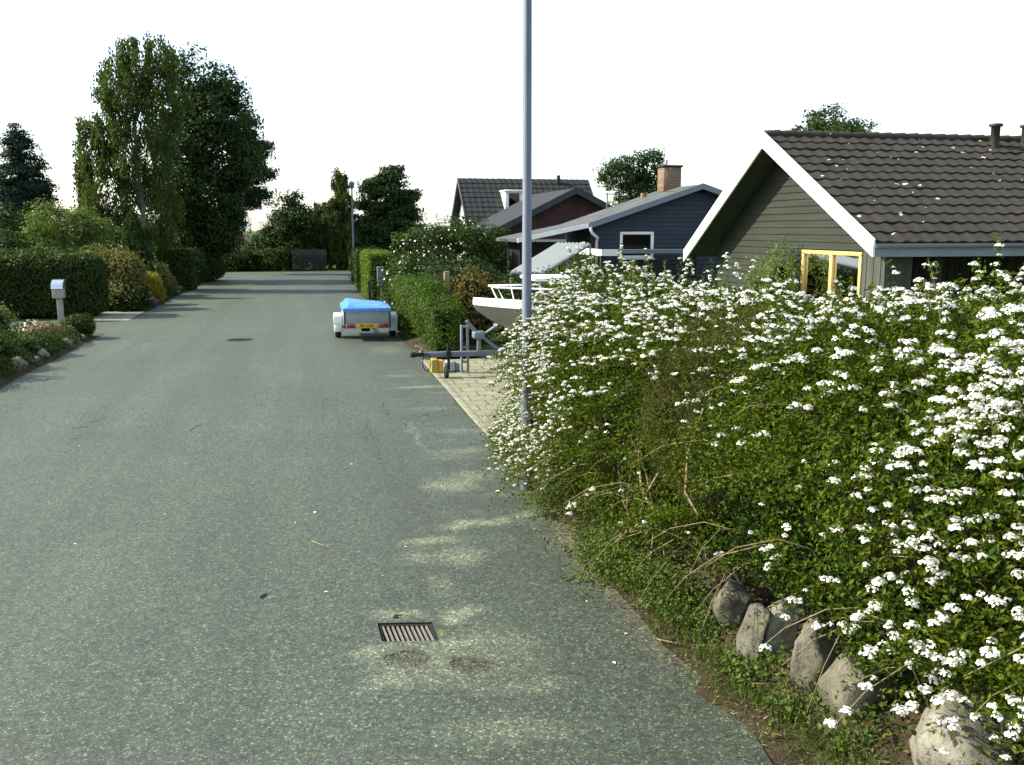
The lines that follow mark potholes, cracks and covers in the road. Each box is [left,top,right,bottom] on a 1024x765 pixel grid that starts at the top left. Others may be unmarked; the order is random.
pothole [384,651,437,667]
drain grate [377,622,439,642]
crack [365,403,451,466]
pothole [449,659,503,674]
